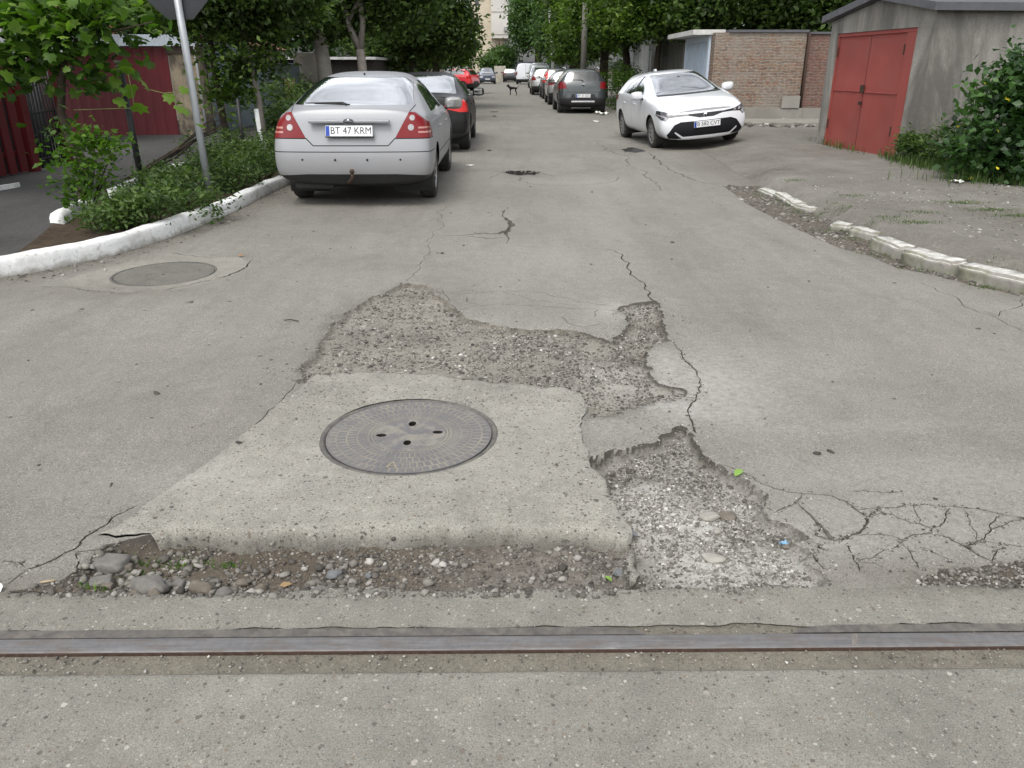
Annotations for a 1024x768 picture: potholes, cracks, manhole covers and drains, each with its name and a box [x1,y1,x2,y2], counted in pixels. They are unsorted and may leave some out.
crack [926,285,1023,331]
crack [0,505,137,585]
crack [673,342,701,434]
pothole [920,561,1024,588]
pothole [12,520,634,596]
pothole [294,283,688,418]
crack [407,203,653,300]
manhole cover [109,262,217,286]
crack [723,464,1024,572]
pothole [589,425,833,590]
manhole cover [319,400,498,476]
